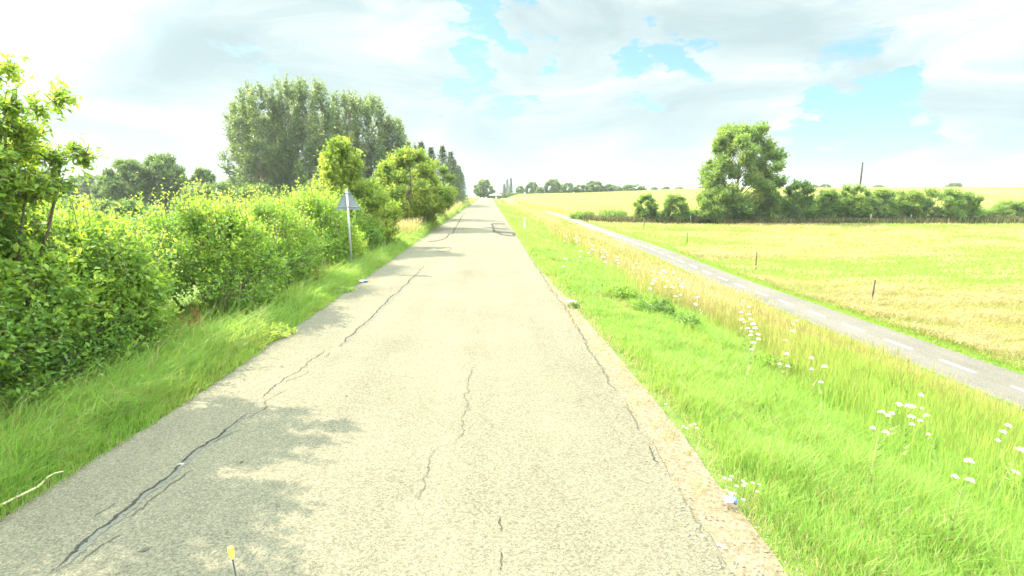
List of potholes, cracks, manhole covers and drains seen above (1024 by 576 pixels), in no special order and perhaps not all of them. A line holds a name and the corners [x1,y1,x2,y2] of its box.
crack [50,214,464,573]
crack [541,272,658,463]
